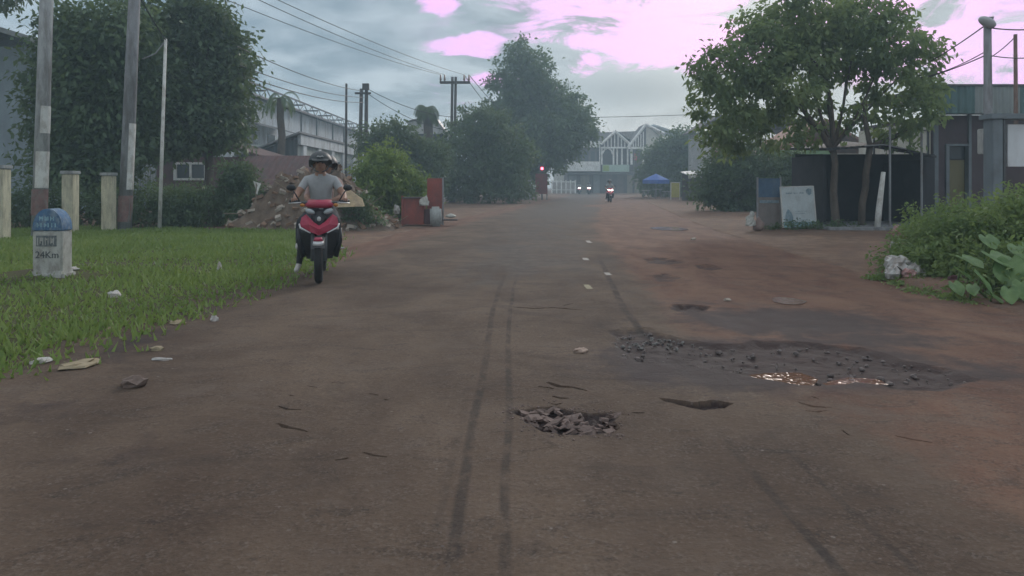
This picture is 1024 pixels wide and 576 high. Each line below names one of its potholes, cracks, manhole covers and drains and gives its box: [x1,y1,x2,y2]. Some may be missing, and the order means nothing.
pothole [669,303,711,313]
pothole [495,399,635,441]
crack [538,382,588,405]
pothole [606,326,982,391]
pothole [643,256,686,265]
pothole [660,398,734,410]
crack [275,382,394,432]
crack [334,452,387,461]
